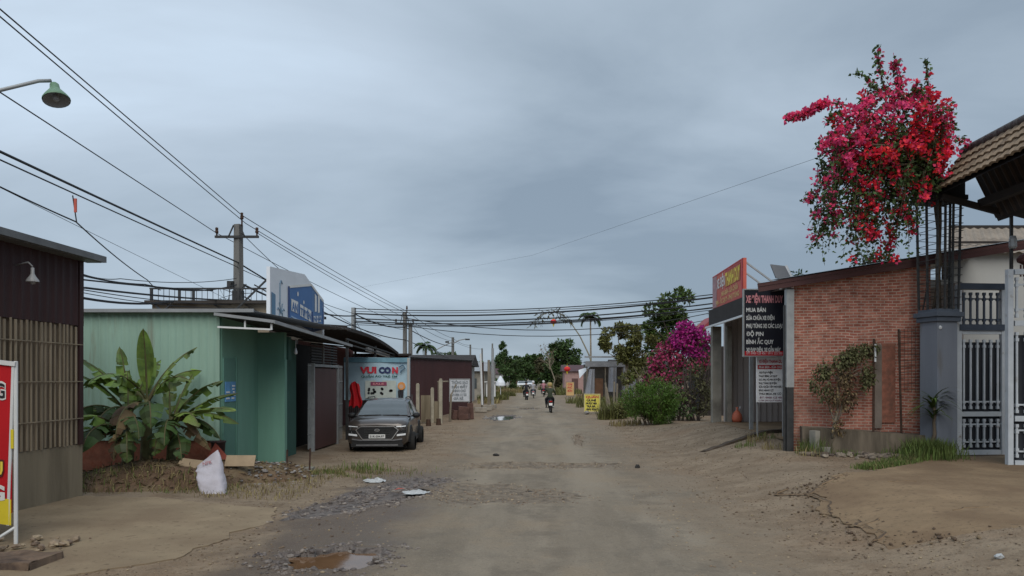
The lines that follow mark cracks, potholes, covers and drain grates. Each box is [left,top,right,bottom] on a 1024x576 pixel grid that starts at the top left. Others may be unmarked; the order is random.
pothole [251,475,476,529]
crack [774,475,887,542]
pothole [241,541,421,576]
